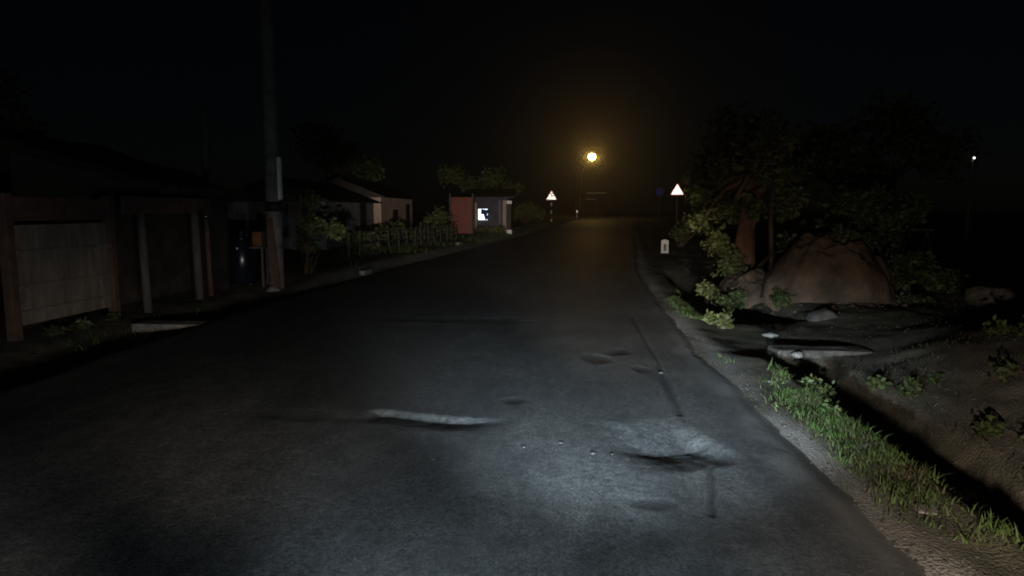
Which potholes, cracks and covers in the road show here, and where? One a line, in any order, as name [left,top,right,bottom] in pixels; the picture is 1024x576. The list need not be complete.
pothole [498,396,535,405]
pothole [627,365,653,375]
pothole [605,348,633,357]
pothole [622,495,684,513]
pothole [578,353,615,365]
pothole [581,416,750,475]
